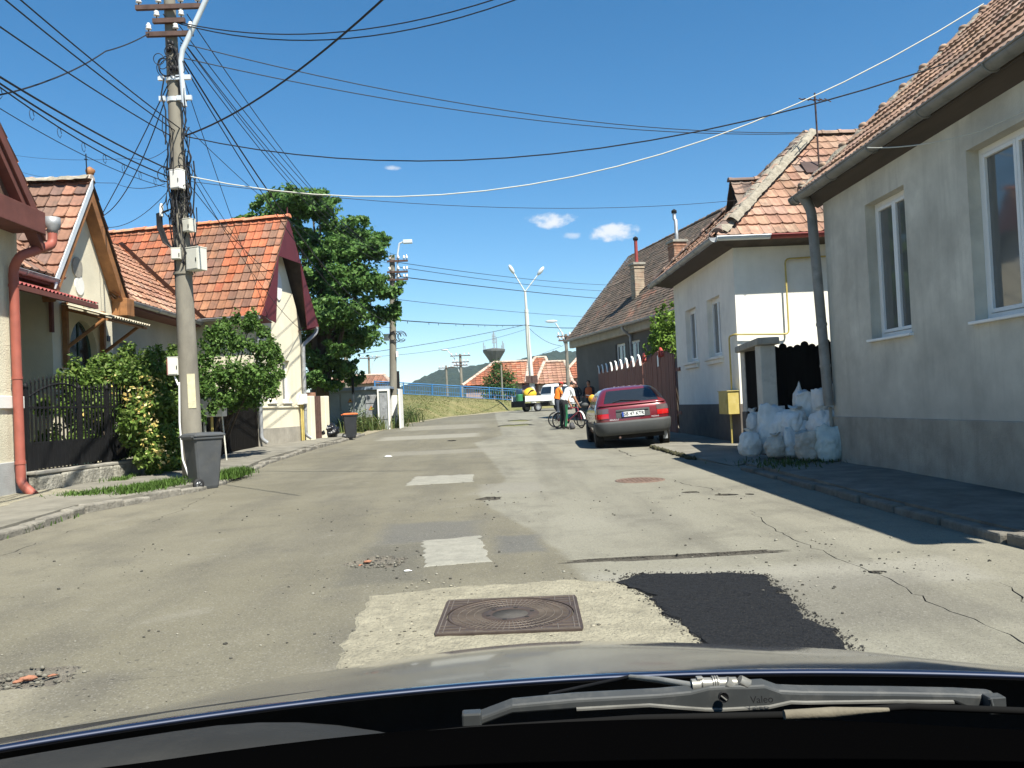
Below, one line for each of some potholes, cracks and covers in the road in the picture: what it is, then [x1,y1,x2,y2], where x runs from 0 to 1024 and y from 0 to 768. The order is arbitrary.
pothole [0,666,87,691]
pothole [344,555,409,568]
crack [750,510,1024,644]
manhole cover [434,595,584,637]
